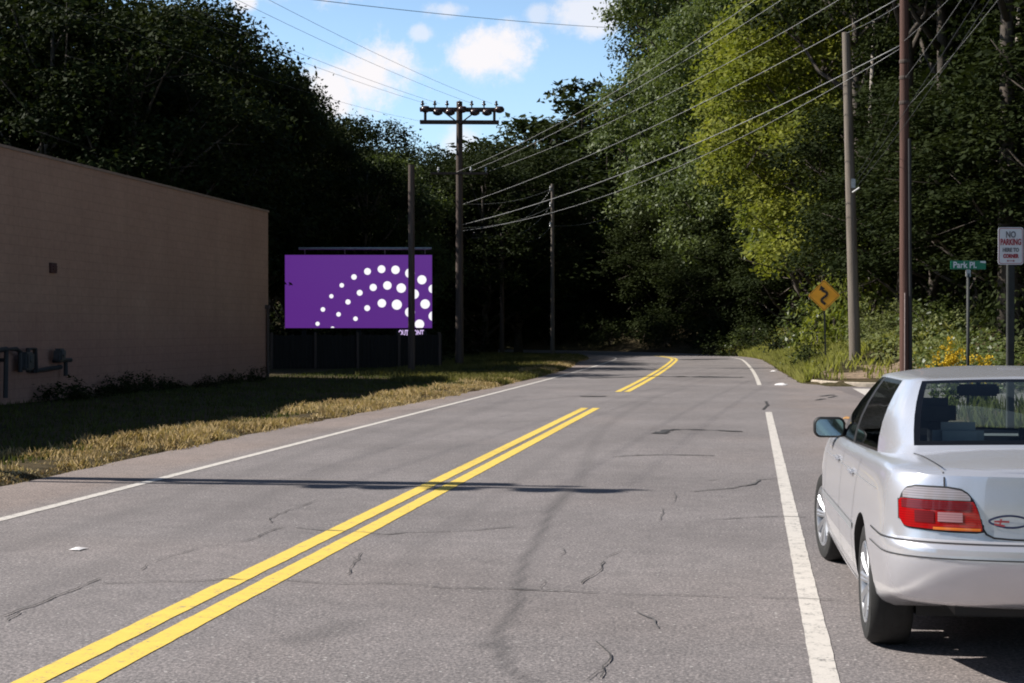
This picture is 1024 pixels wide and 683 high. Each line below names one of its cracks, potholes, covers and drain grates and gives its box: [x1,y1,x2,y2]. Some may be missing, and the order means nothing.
crack [2,499,828,620]
crack [587,640,612,679]
crack [695,478,773,491]
